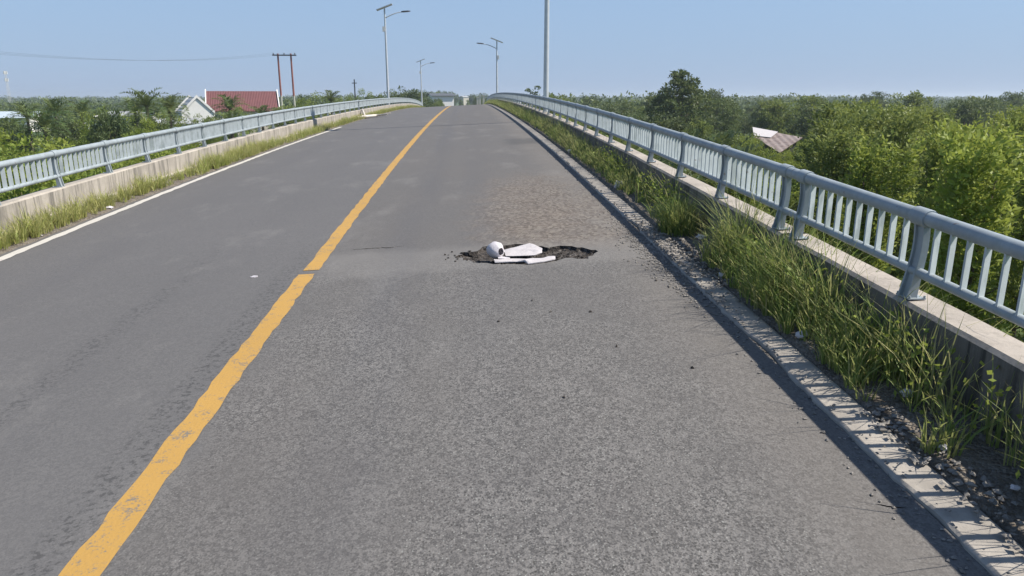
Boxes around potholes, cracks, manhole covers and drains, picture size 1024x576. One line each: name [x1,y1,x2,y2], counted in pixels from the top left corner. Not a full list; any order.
pothole [457,244,598,265]
